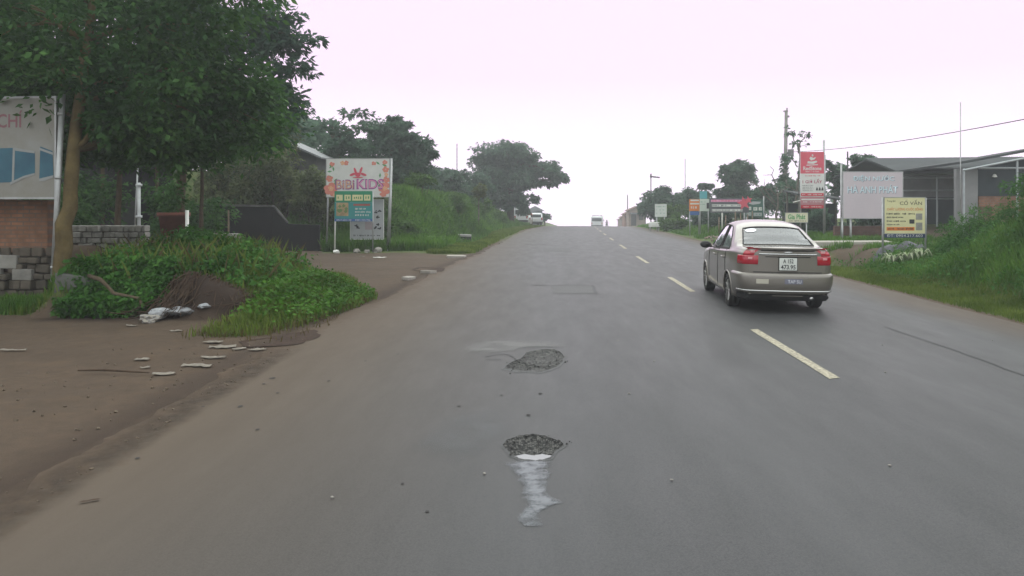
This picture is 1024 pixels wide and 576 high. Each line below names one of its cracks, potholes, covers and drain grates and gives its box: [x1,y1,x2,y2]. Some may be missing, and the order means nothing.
pothole [501,348,568,374]
pothole [499,433,572,461]
